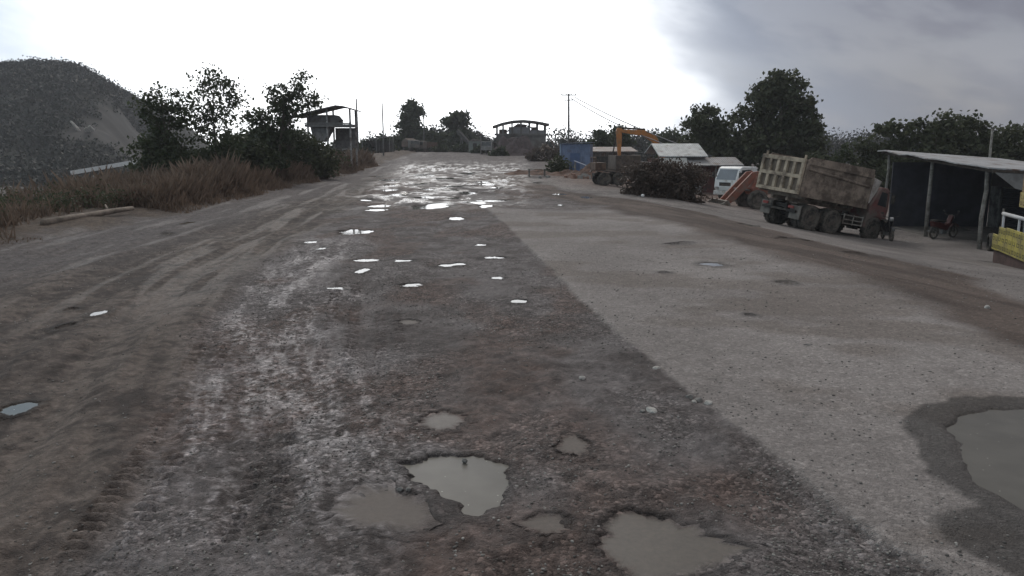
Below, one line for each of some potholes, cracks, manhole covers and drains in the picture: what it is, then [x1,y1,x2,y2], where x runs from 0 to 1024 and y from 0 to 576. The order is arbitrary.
pothole [915,396,1024,529]
pothole [0,398,52,420]
pothole [402,202,458,210]
pothole [302,472,464,543]
pothole [576,498,779,576]
pothole [542,429,603,463]
pothole [498,506,586,547]
pothole [379,447,527,527]
pothole [327,227,382,235]
pothole [388,317,429,327]
pothole [403,407,478,436]
